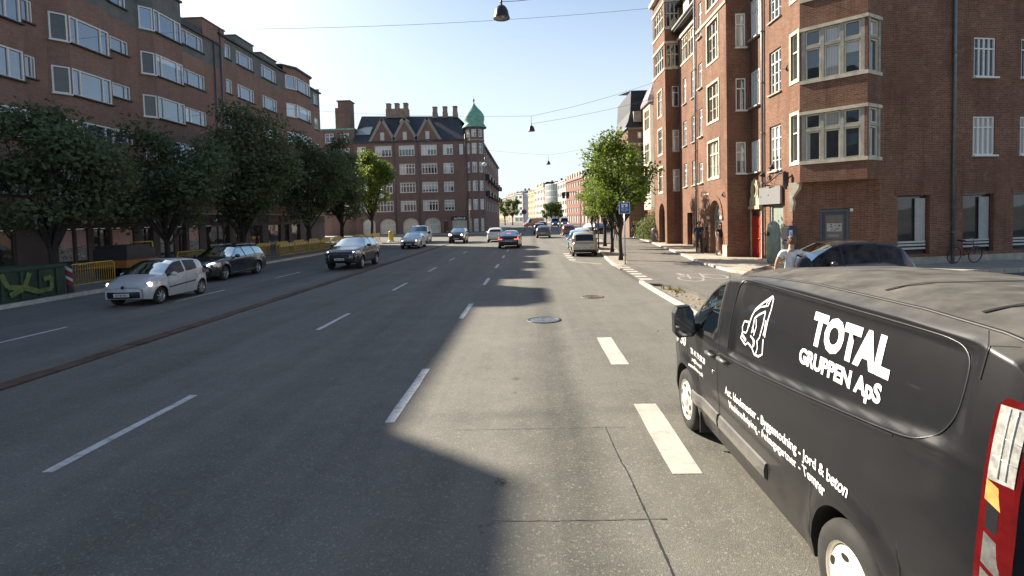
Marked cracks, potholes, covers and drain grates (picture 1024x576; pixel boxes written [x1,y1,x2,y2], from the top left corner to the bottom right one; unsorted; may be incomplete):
crack [463,427,675,576]
